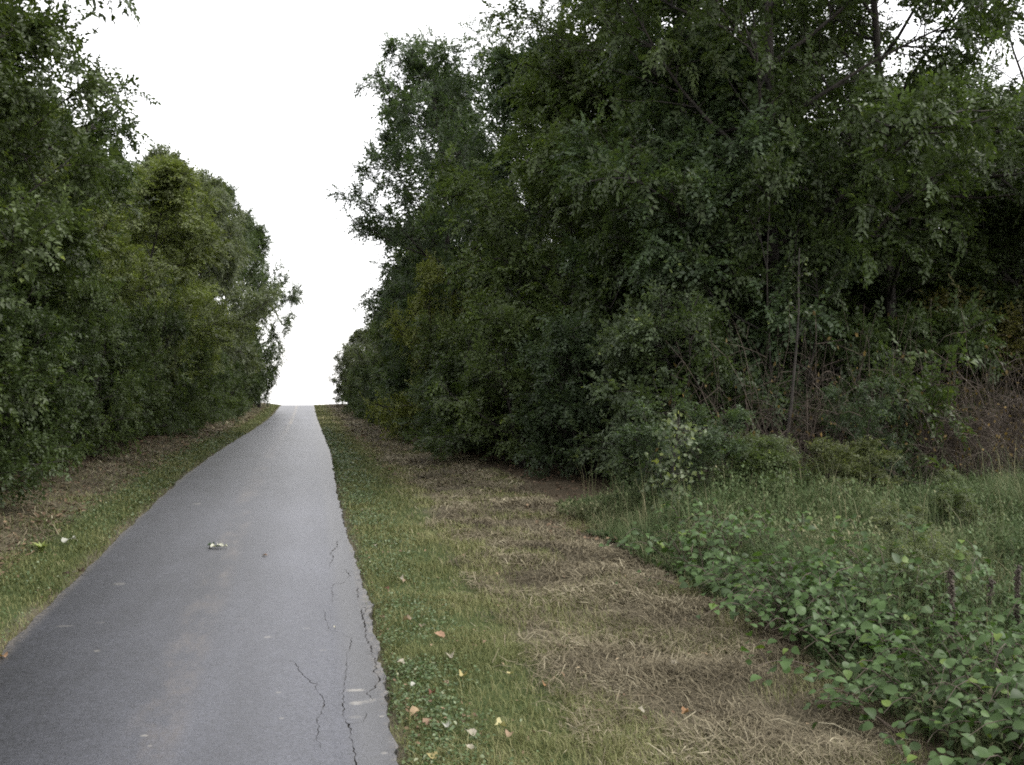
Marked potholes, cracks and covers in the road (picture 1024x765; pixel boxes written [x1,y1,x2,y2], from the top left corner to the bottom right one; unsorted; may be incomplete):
crack [294,540,381,765]
